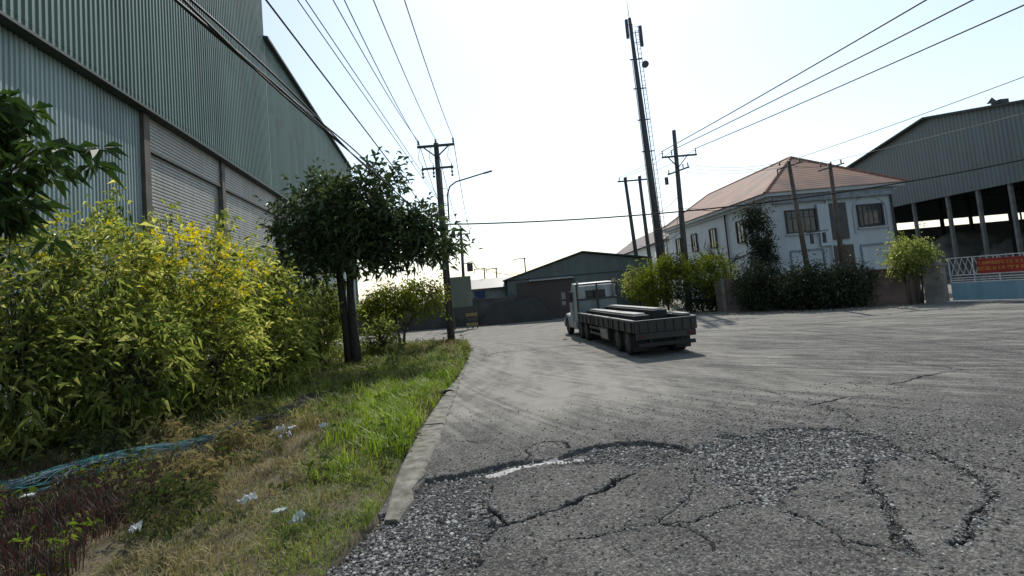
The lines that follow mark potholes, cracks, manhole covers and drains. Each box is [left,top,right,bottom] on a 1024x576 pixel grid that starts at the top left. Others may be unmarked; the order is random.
crack [493,474,631,527]
crack [558,463,747,552]
pothole [691,426,906,508]
crack [783,450,1018,558]
pothole [326,440,693,576]
